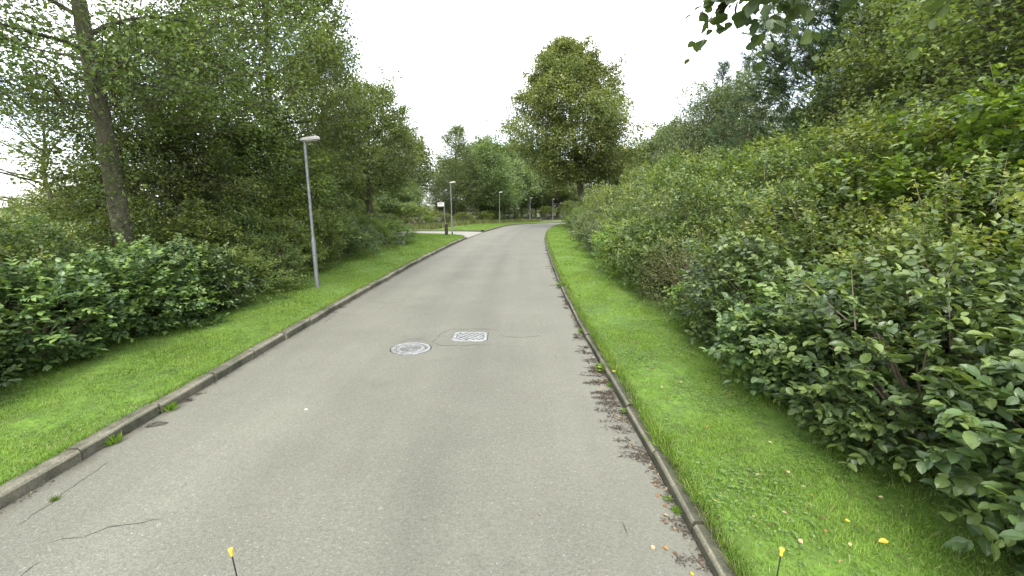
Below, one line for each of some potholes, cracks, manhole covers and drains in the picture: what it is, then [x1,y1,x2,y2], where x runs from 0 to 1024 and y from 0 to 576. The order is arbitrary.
crack [50,519,153,543]
manhole cover [391,342,431,355]
